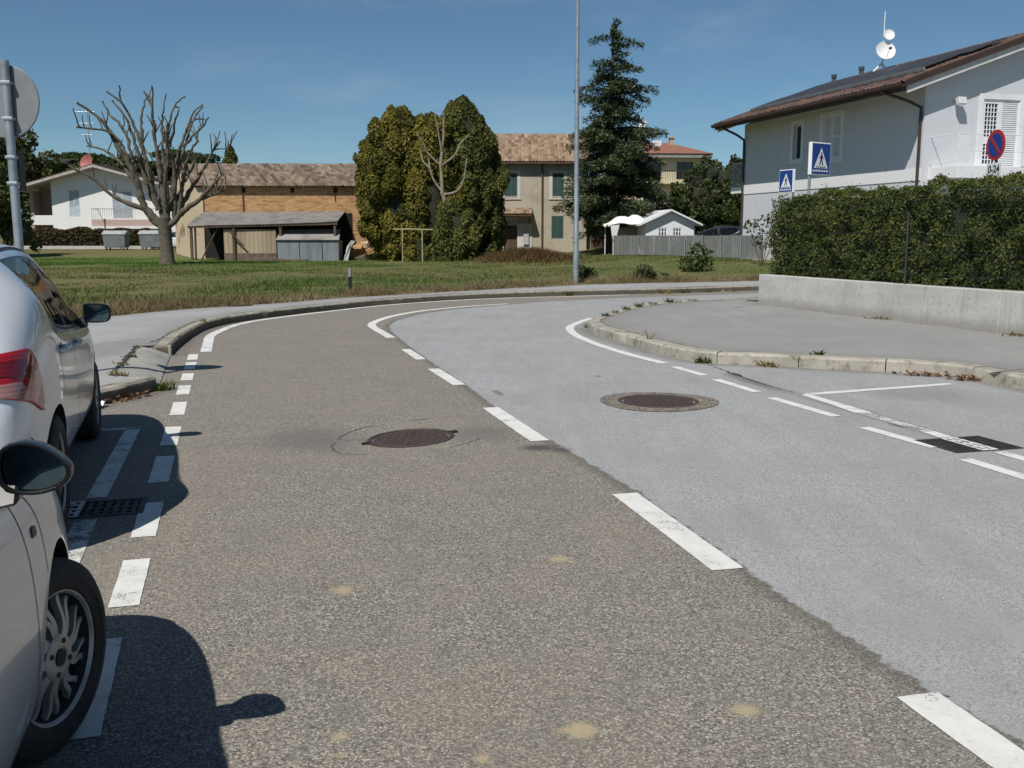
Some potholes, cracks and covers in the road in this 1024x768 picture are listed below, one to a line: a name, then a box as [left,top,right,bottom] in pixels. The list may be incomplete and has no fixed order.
manhole cover [361,428,458,448]
manhole cover [600,392,719,412]
drain grate [68,497,148,519]
drain grate [915,436,1024,453]
